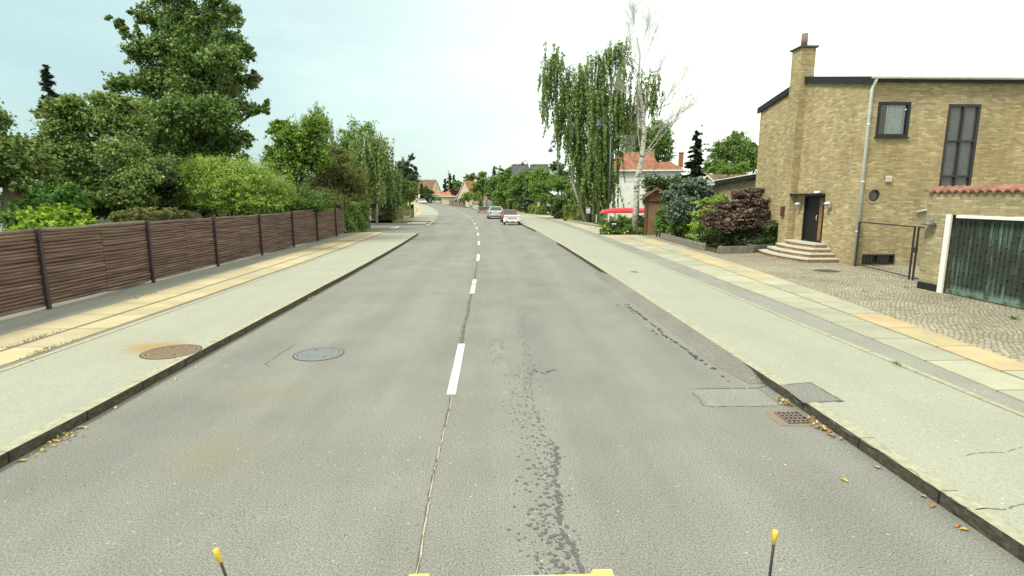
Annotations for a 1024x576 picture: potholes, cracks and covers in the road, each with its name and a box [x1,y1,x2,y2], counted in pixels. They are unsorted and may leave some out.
manhole cover [292,347,345,361]
manhole cover [139,344,203,360]
drain grate [766,409,822,426]
crack [620,304,1024,510]
crack [479,307,593,575]
